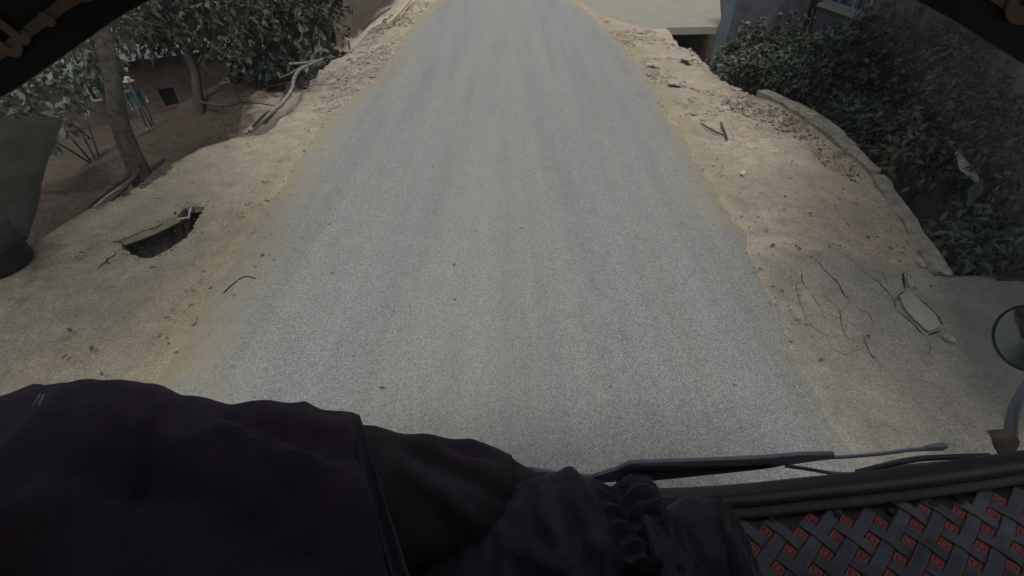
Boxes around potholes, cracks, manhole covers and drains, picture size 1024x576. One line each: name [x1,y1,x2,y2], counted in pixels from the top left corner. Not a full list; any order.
crack [796,252,946,395]
pothole [113,206,205,258]
